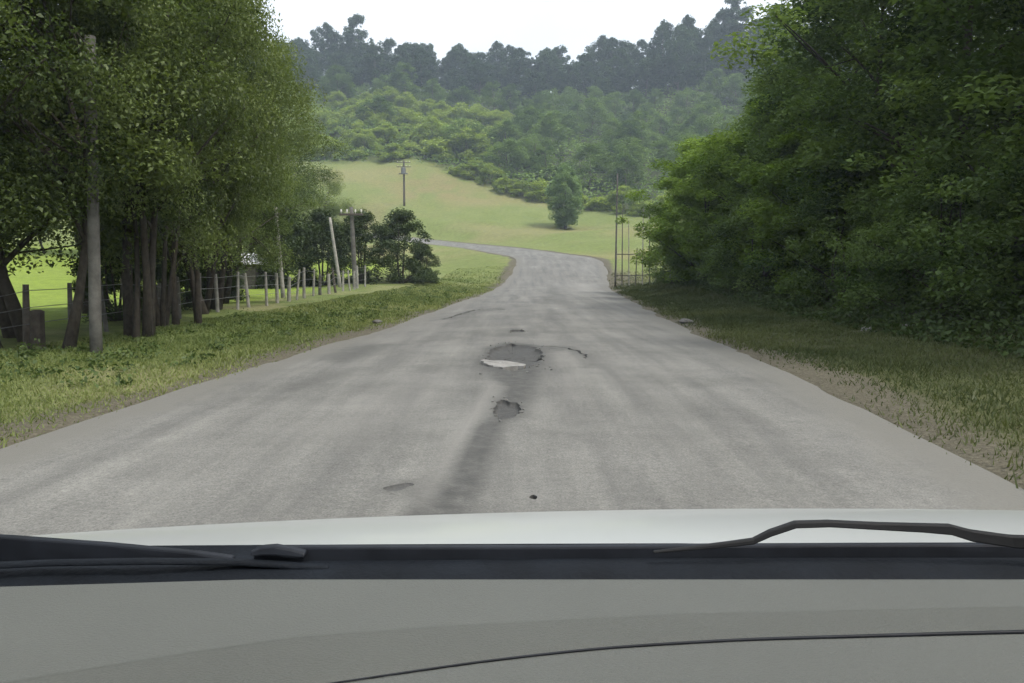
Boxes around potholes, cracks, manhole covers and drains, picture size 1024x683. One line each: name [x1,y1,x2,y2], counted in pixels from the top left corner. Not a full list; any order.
pothole [478,341,556,375]
pothole [490,394,524,422]
